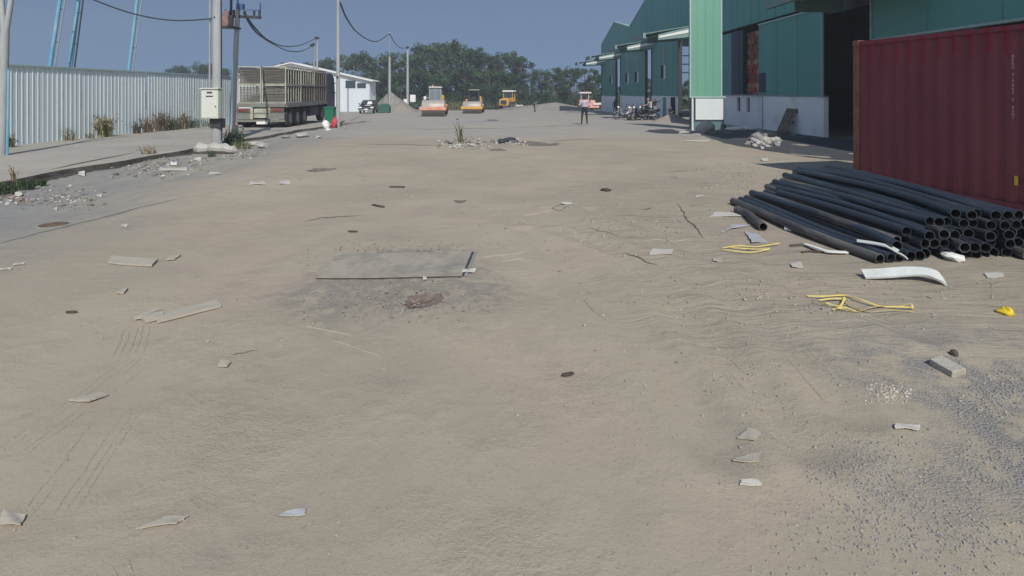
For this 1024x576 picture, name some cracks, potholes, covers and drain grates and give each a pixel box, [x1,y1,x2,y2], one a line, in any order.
pothole [404,293,443,309]
manhole cover [316,251,477,279]
